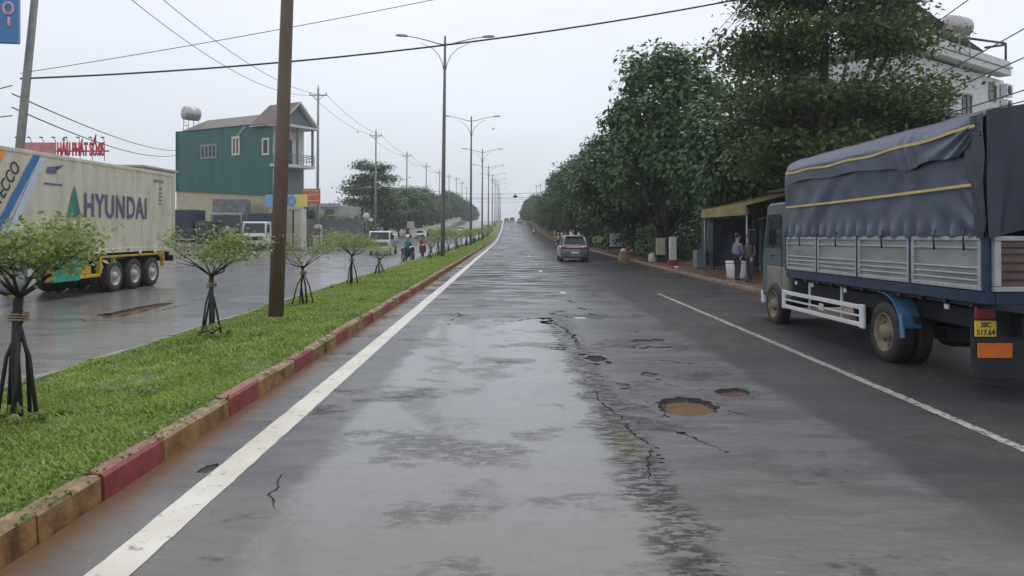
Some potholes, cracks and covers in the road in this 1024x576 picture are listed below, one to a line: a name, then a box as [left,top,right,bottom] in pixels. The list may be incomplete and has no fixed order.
crack [267,472,286,509]
pothole [700,388,769,398]
pothole [643,394,746,419]
pothole [81,297,218,322]
crack [595,331,729,480]
